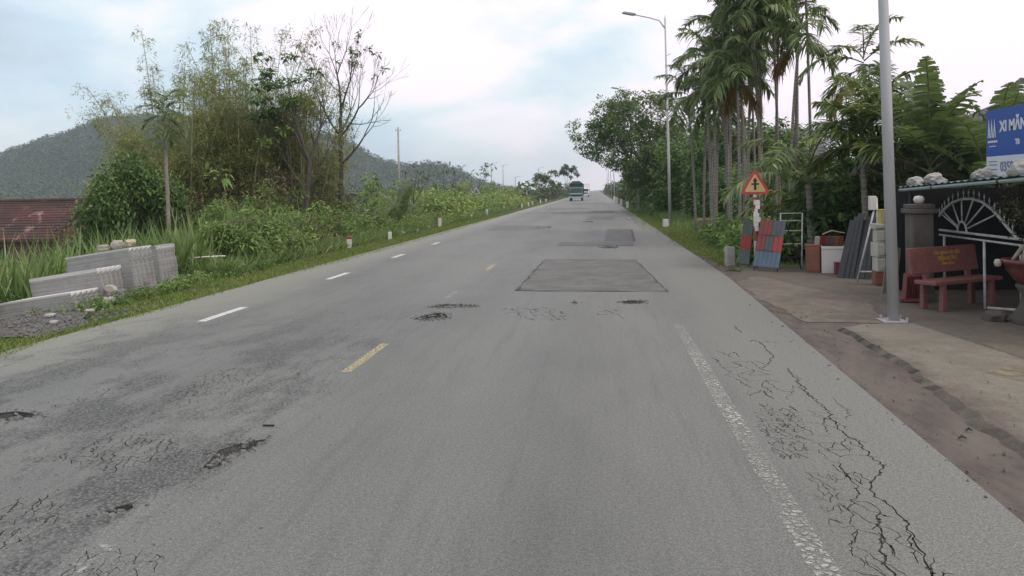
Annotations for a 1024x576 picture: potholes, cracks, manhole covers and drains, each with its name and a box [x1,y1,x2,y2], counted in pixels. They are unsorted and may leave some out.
pothole [0,408,46,423]
pothole [410,311,452,322]
crack [52,434,184,471]
crack [61,548,163,576]
crack [0,494,63,550]
crack [711,326,954,576]
crack [163,368,261,409]
pothole [194,435,271,474]
crack [503,307,567,321]
